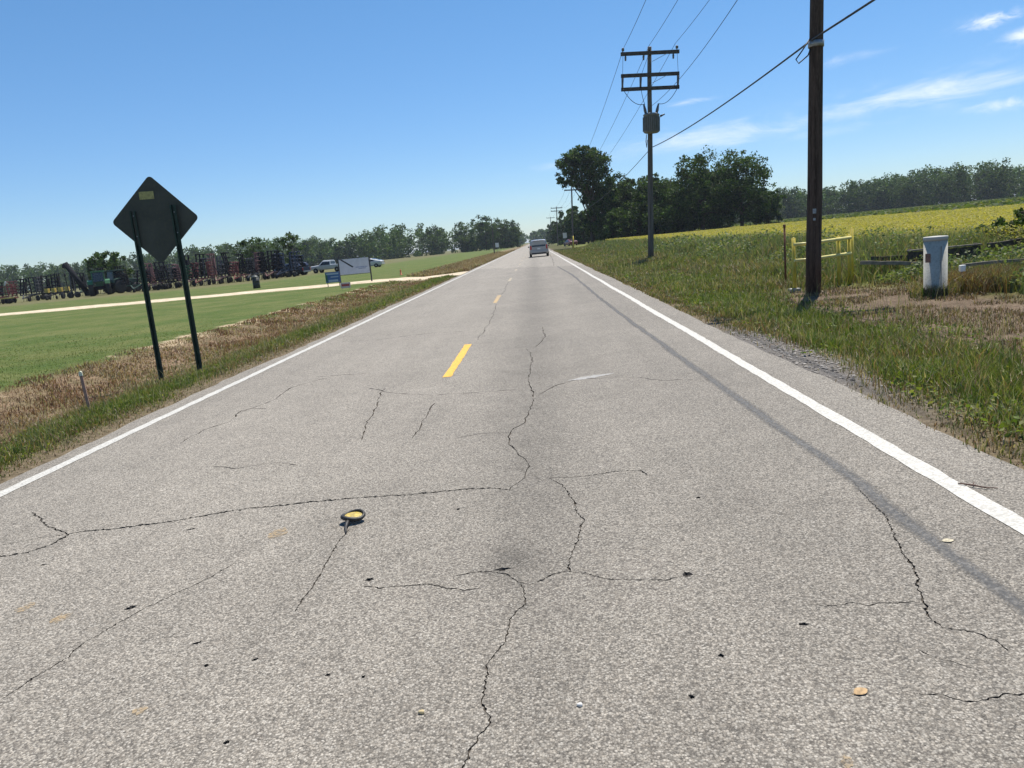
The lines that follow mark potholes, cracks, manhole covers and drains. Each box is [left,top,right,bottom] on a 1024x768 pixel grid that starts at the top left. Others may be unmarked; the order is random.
crack [819,484,1008,651]
crack [365,470,683,768]
crack [295,529,350,611]
crack [2,567,228,699]
crack [923,693,1024,702]
crack [0,327,683,557]
